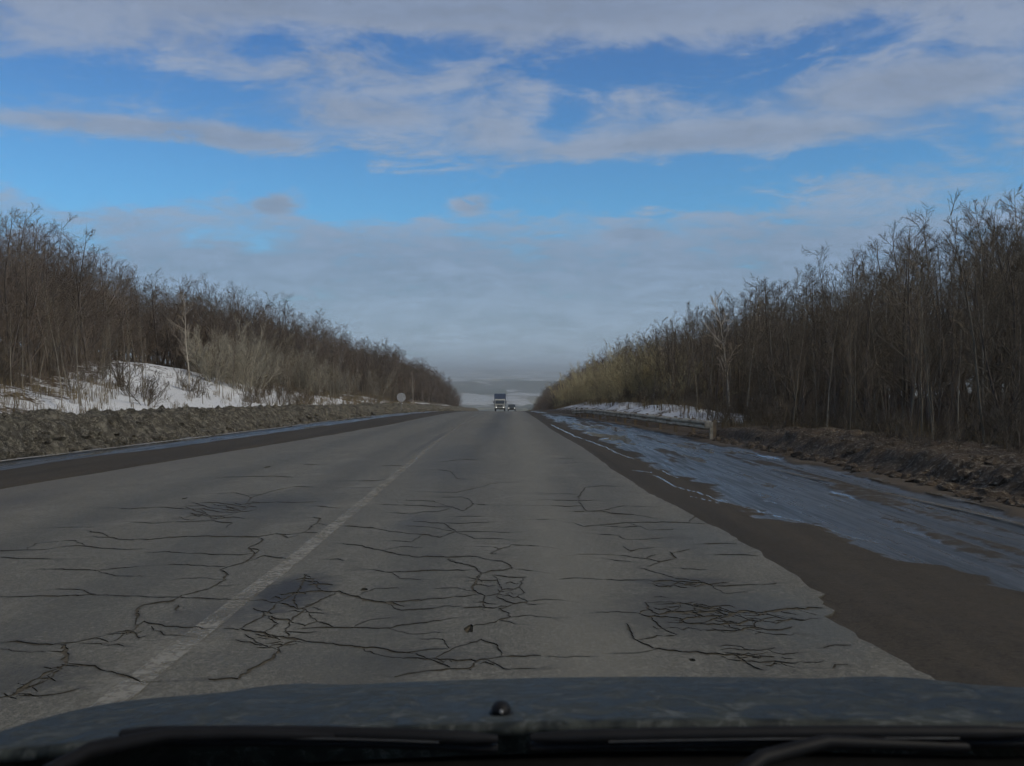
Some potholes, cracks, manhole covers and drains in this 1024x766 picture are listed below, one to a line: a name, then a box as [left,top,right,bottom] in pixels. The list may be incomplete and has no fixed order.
crack [0,486,324,698]
crack [395,638,588,677]
crack [563,486,822,670]
crack [208,459,558,681]
